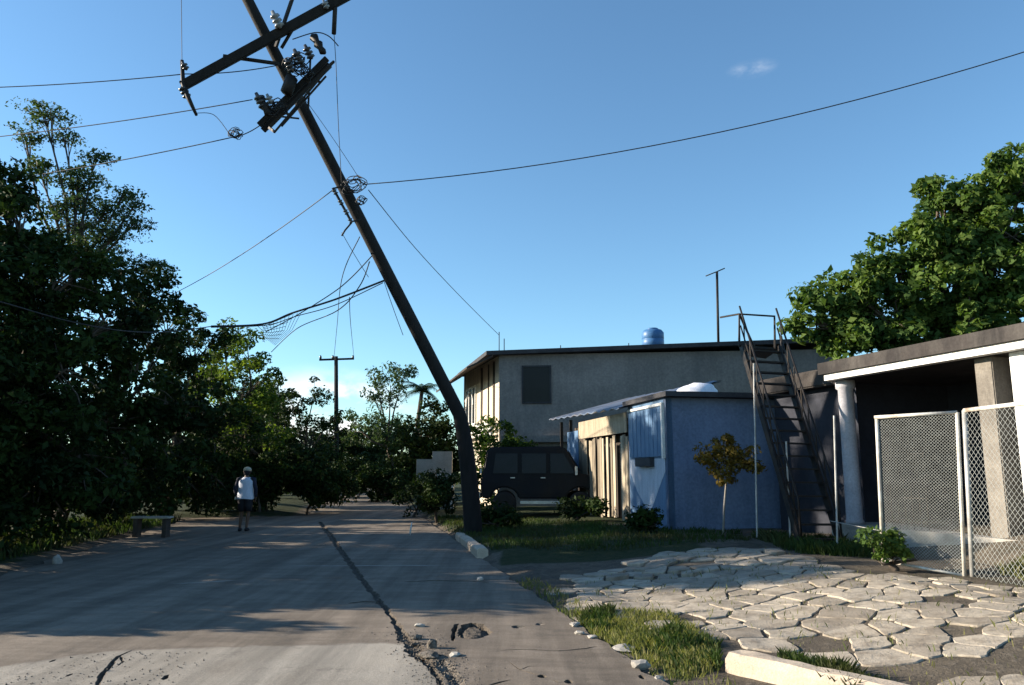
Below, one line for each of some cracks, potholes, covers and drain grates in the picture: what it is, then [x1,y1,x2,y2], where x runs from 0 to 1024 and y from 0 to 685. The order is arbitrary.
crack [318,522,482,685]
crack [95,650,132,685]
pothole [457,623,493,639]
